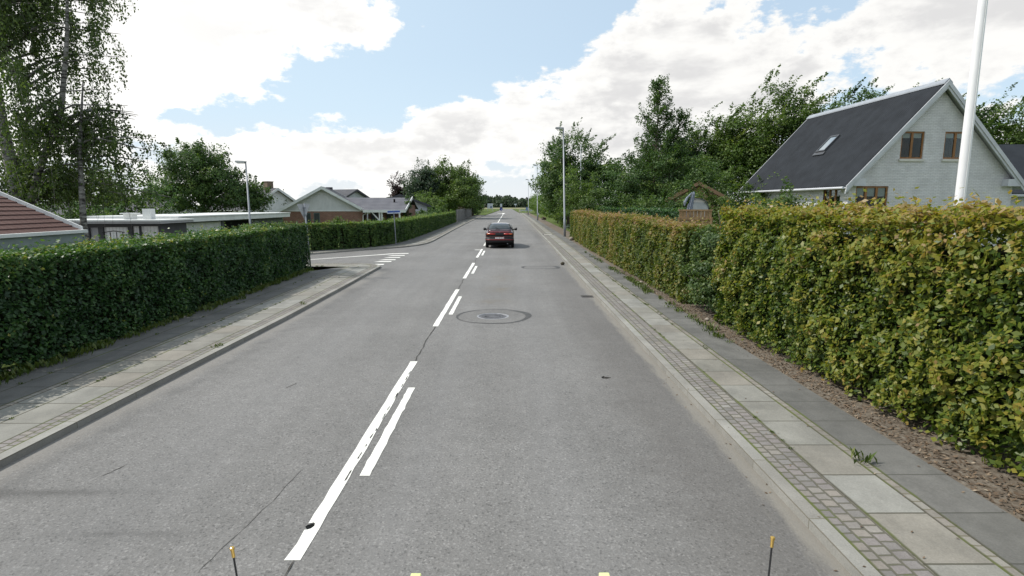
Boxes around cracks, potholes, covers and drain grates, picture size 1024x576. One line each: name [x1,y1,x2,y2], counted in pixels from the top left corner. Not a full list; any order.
crack [198,472,299,572]
